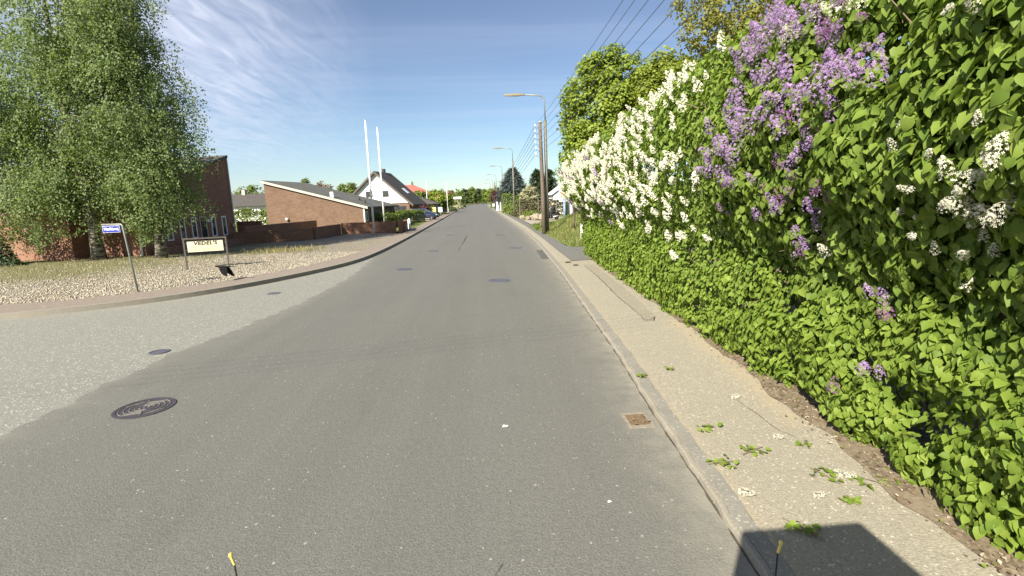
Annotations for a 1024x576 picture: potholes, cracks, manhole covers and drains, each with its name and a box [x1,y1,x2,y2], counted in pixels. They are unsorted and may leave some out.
manhole cover [111,397,176,419]
drain grate [620,412,656,429]
